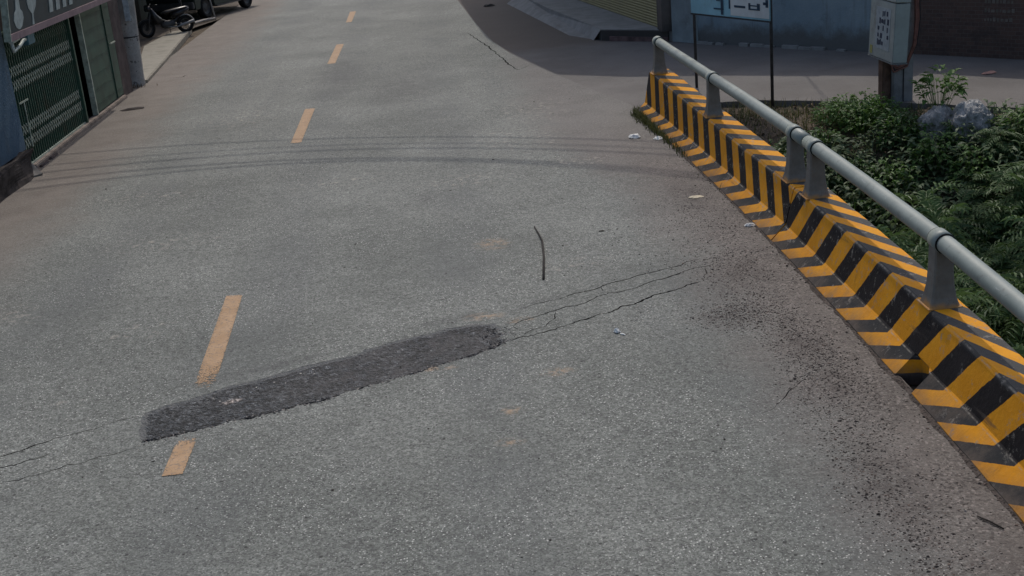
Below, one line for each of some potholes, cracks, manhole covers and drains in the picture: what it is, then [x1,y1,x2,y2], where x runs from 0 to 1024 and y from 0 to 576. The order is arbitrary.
crack [511,259,713,341]
crack [0,416,136,483]
